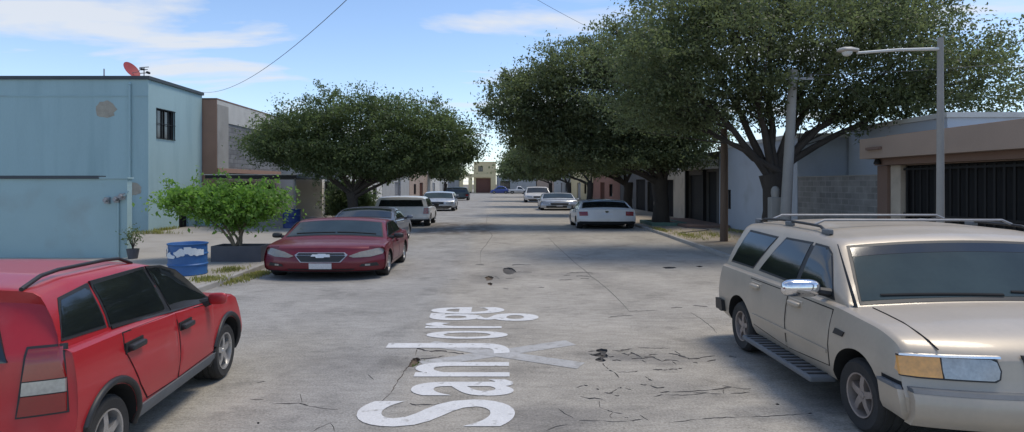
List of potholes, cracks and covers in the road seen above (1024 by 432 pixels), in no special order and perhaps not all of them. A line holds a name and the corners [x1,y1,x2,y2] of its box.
crack [369,348,463,406]
pothole [592,348,608,362]
crack [546,347,751,431]
crack [476,218,544,289]
crack [250,381,337,431]
